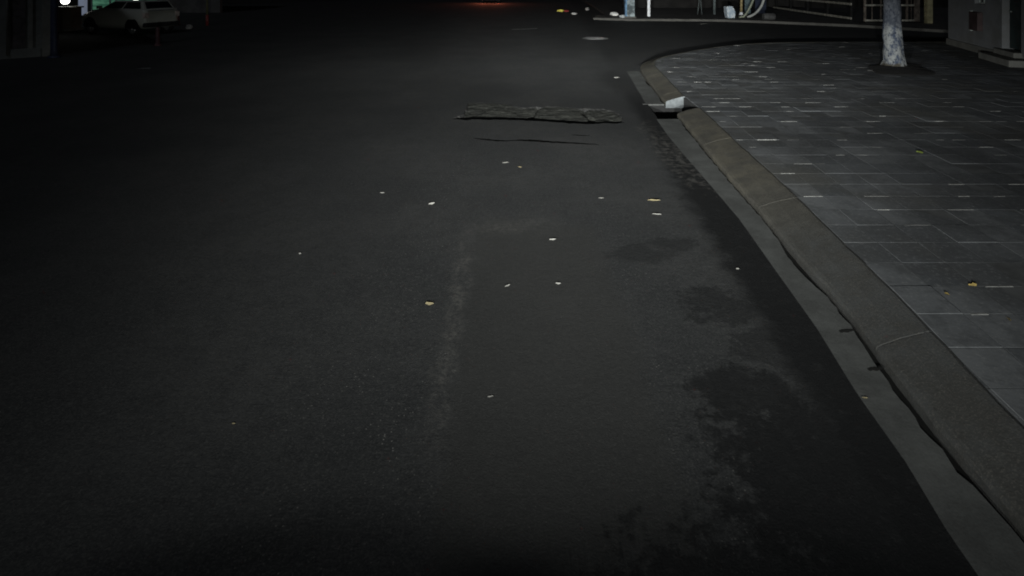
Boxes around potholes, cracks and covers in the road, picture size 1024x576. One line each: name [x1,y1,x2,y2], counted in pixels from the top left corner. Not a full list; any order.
crack [475,135,598,145]
